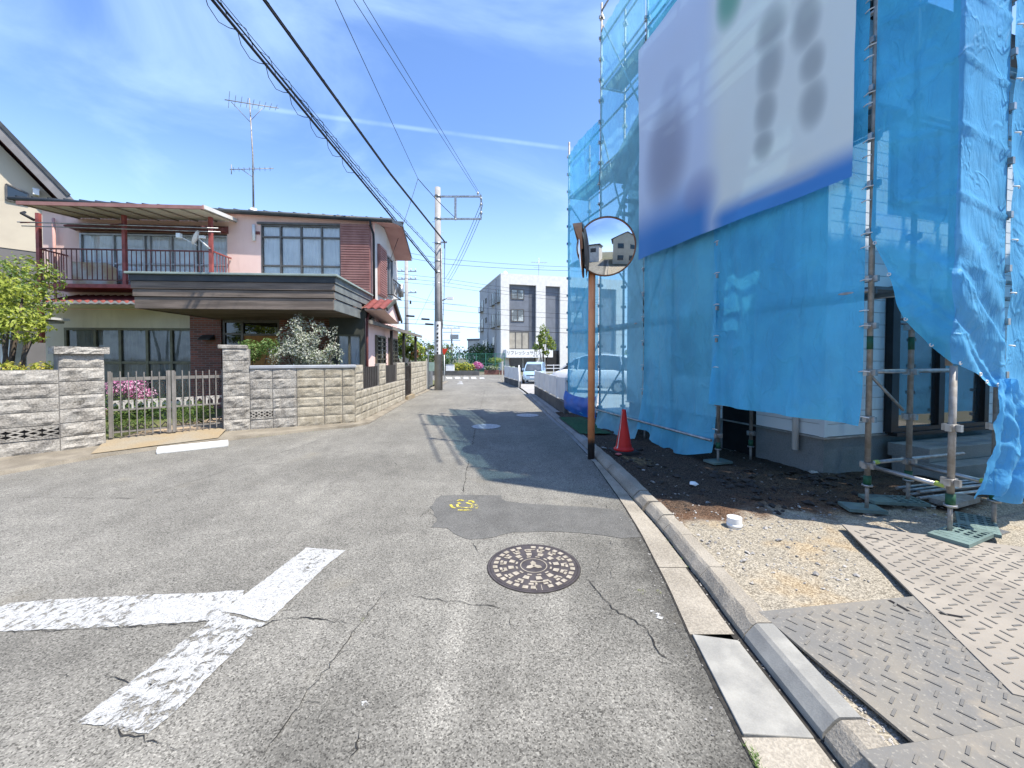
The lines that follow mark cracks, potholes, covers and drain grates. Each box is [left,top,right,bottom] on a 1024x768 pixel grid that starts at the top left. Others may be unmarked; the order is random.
crack [258,592,385,762]
crack [564,559,676,663]
manhole cover [487,544,581,594]
